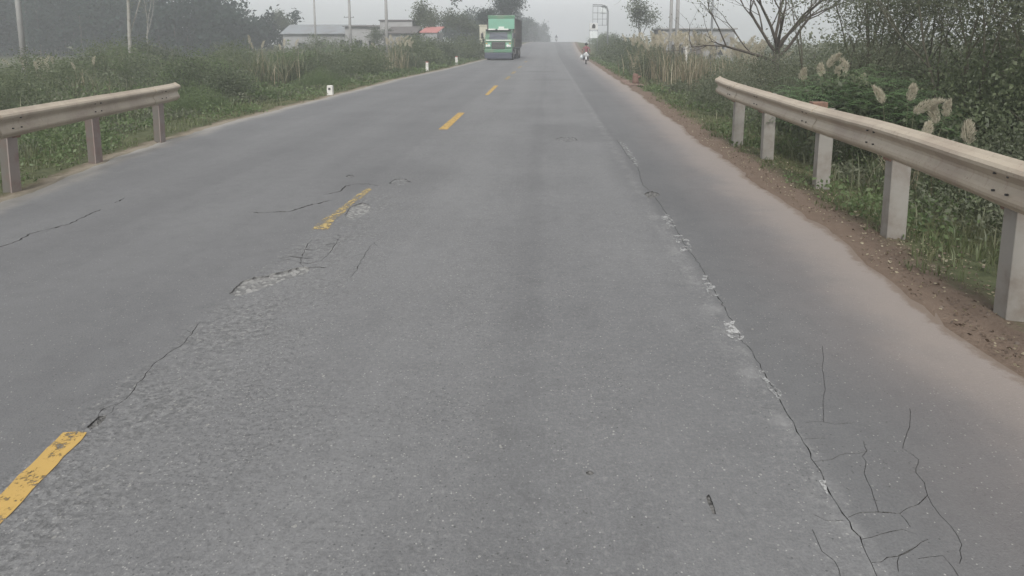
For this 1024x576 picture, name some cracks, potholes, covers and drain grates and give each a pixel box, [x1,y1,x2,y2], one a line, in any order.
crack [281,235,376,278]
crack [254,184,376,213]
crack [0,187,148,247]
crack [86,326,197,428]
crack [810,346,962,575]
pothole [389,178,411,186]
pothole [229,266,310,296]
